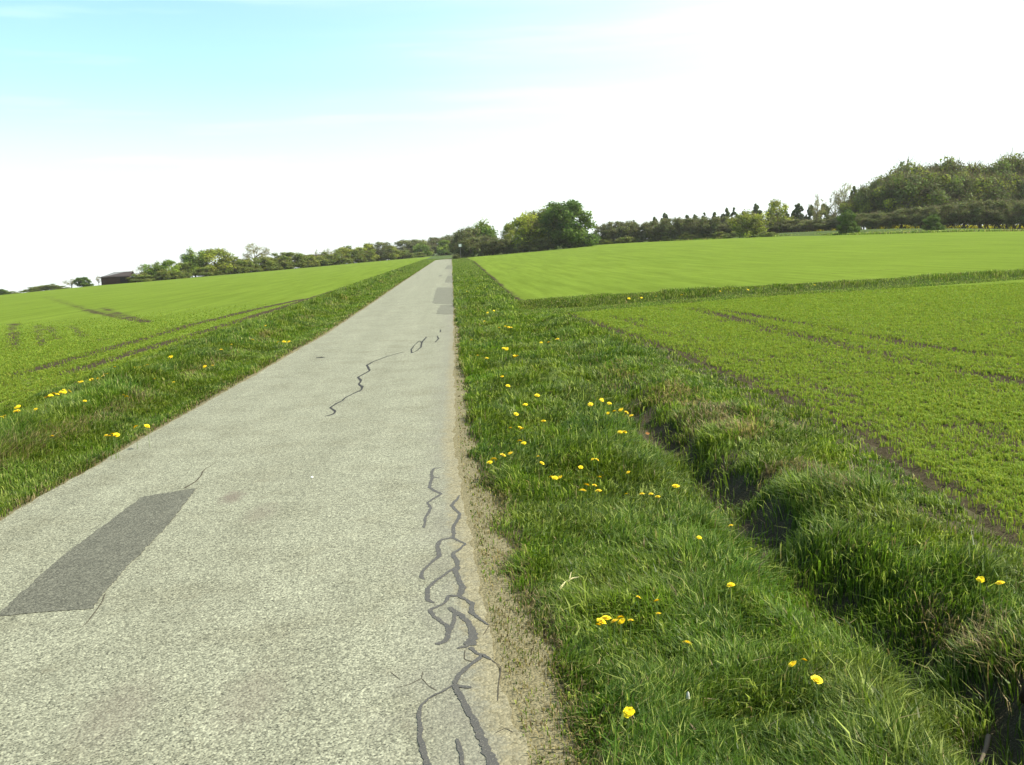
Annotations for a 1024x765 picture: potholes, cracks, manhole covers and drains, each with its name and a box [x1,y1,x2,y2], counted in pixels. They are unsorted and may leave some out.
crack [327,330,441,416]
